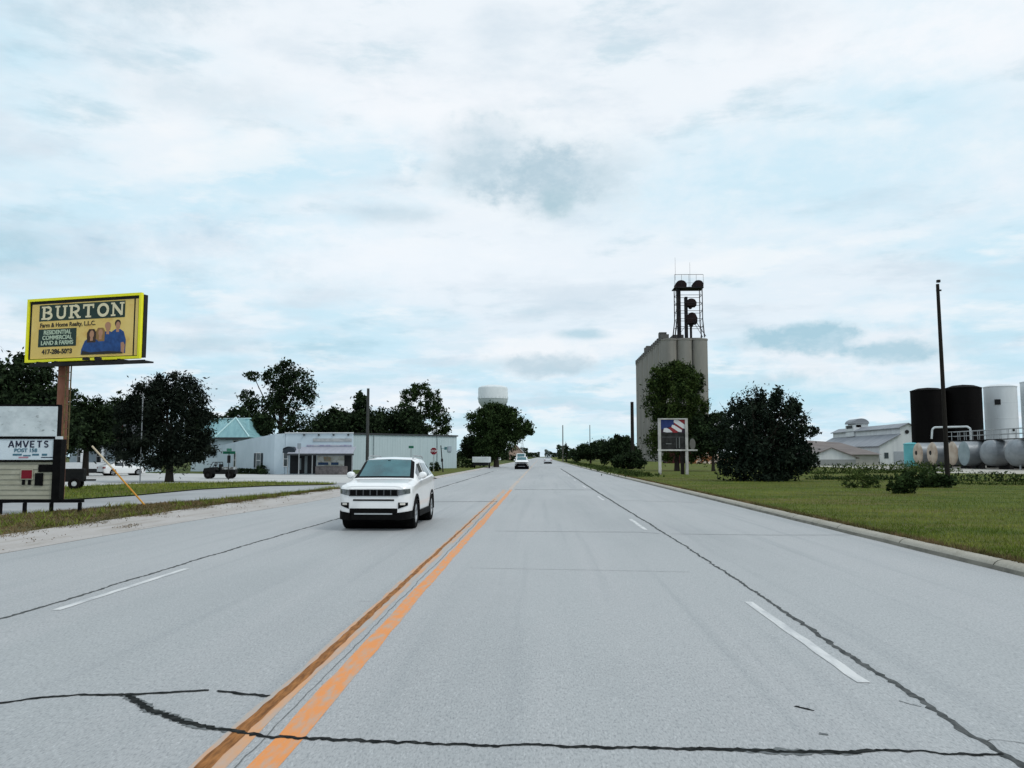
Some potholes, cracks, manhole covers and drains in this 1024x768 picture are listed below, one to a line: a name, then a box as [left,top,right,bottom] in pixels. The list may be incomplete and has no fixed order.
crack [0,470,1024,768]
